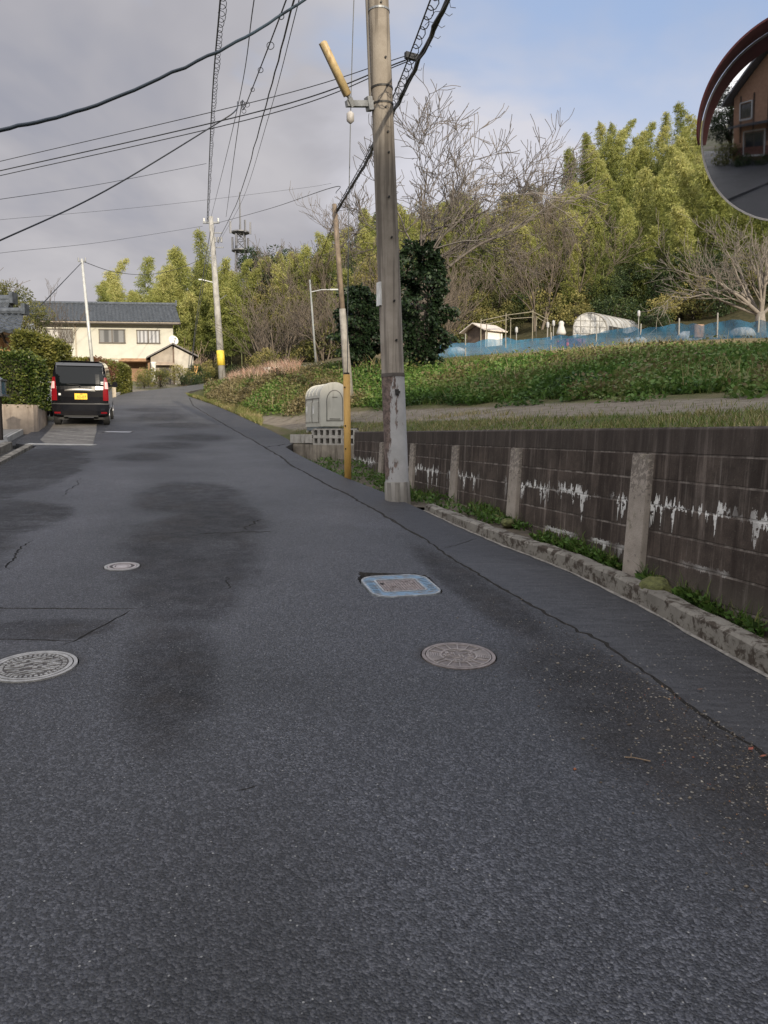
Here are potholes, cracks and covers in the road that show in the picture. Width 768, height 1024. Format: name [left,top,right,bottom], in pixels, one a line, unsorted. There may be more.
manhole cover [361,574,441,598]
manhole cover [0,651,78,683]
manhole cover [422,642,496,670]
crack [197,519,270,535]
crack [5,540,33,569]
manhole cover [104,562,140,571]
